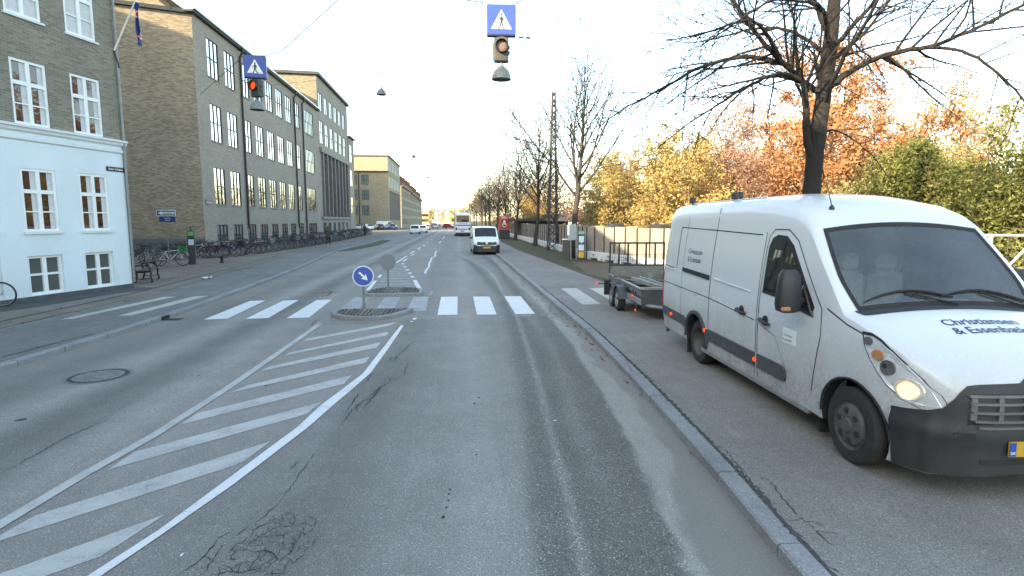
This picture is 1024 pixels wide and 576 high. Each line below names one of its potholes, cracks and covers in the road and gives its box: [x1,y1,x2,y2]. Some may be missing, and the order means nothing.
manhole cover [61,368,135,384]
crack [178,449,320,576]
crack [343,344,410,422]
